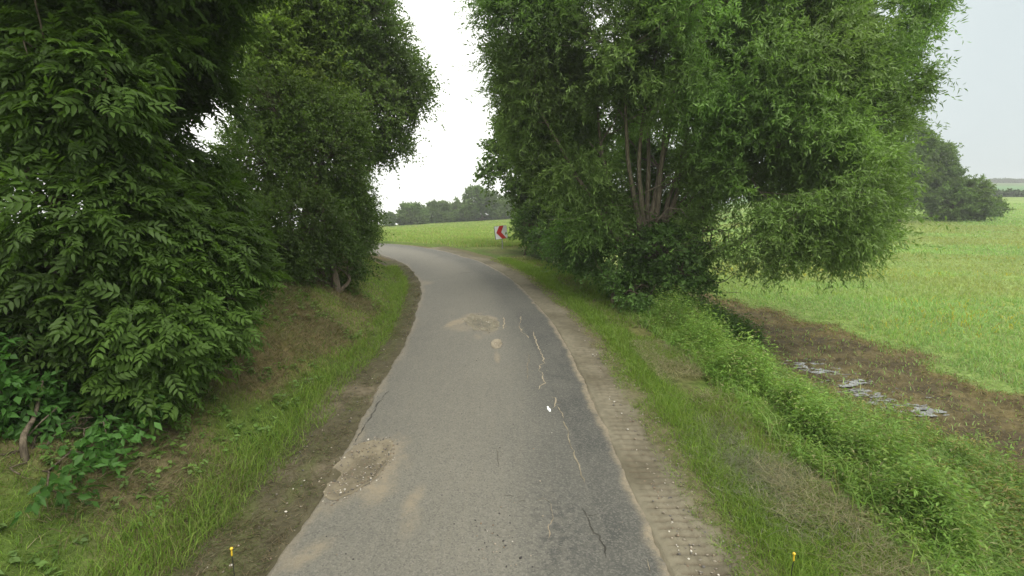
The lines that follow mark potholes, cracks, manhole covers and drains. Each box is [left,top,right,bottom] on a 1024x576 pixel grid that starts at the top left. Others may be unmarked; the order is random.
crack [583,510,606,556]
pothole [318,437,398,506]
crack [502,317,585,482]
